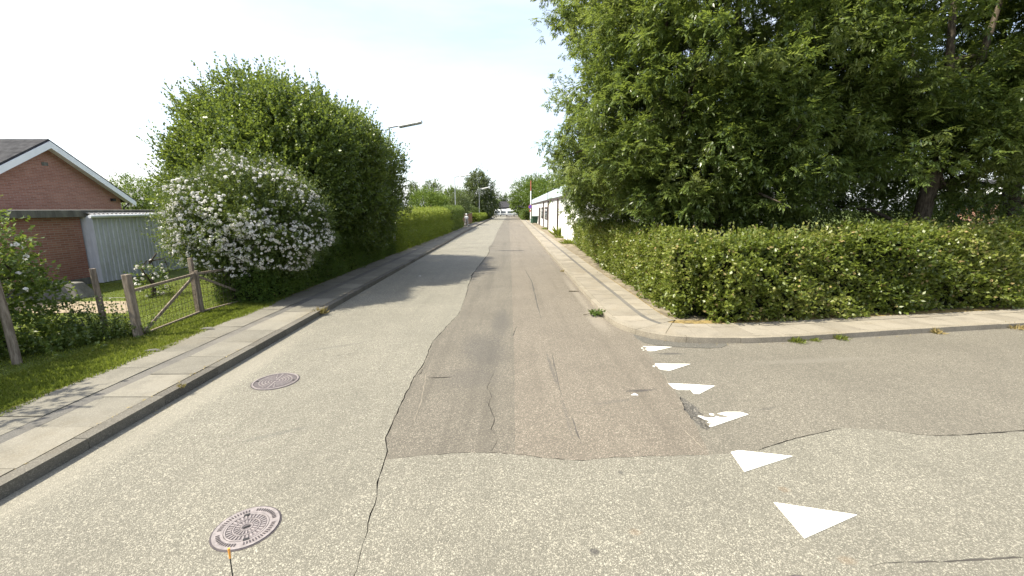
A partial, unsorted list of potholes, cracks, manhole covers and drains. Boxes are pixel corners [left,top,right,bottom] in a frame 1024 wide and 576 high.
manhole cover [250,373,300,390]
crack [760,428,1024,450]
manhole cover [209,506,282,552]
pothole [680,397,710,430]
crack [870,556,1024,567]
crack [354,299,702,576]
